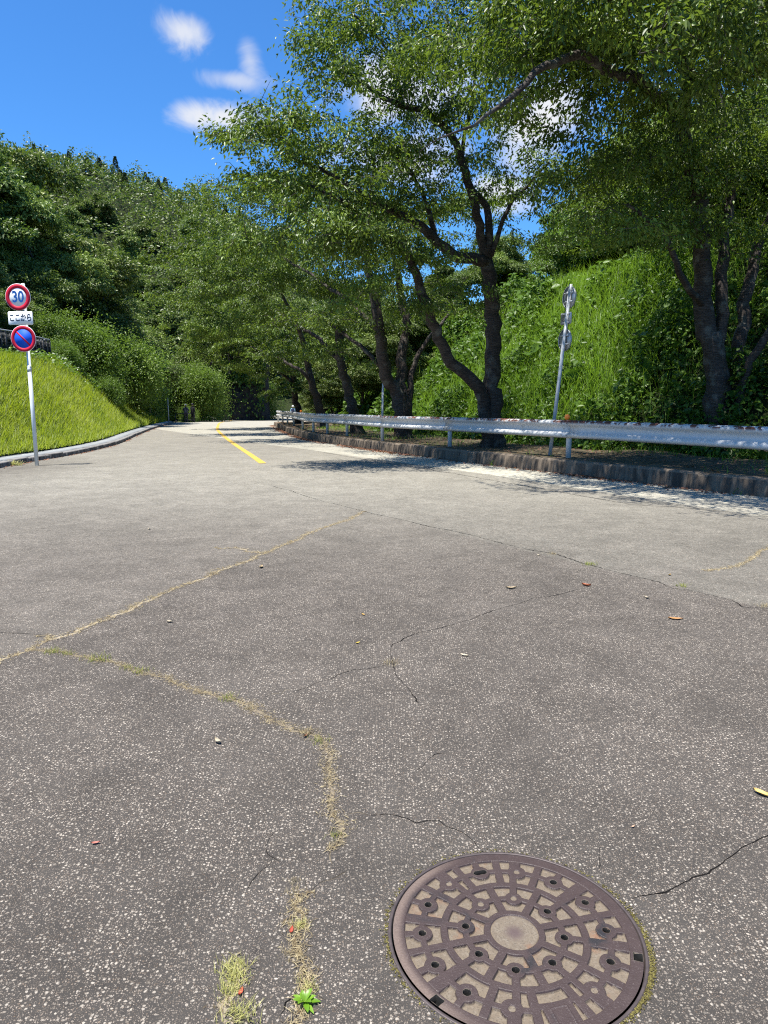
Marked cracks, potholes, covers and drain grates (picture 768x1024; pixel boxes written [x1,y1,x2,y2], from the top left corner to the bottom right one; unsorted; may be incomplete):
crack [633,835,768,899]
manhole cover [379,848,657,1024]
crack [0,511,367,1024]
crack [380,814,479,848]
crack [297,589,578,704]
crack [702,547,768,571]
